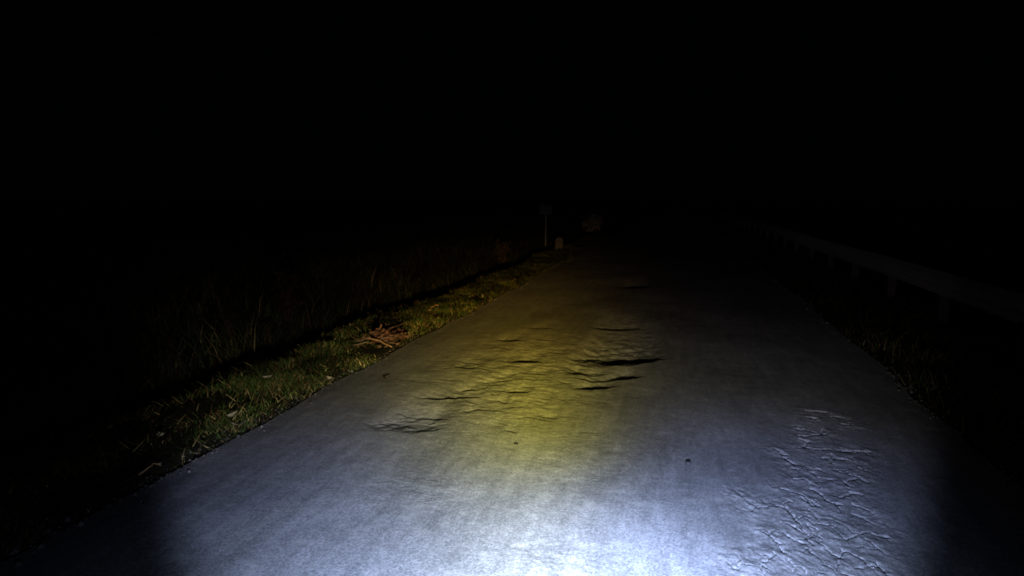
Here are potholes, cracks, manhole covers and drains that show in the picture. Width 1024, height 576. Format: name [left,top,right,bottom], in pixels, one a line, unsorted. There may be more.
pothole [574,384,617,392]
pothole [548,374,643,385]
